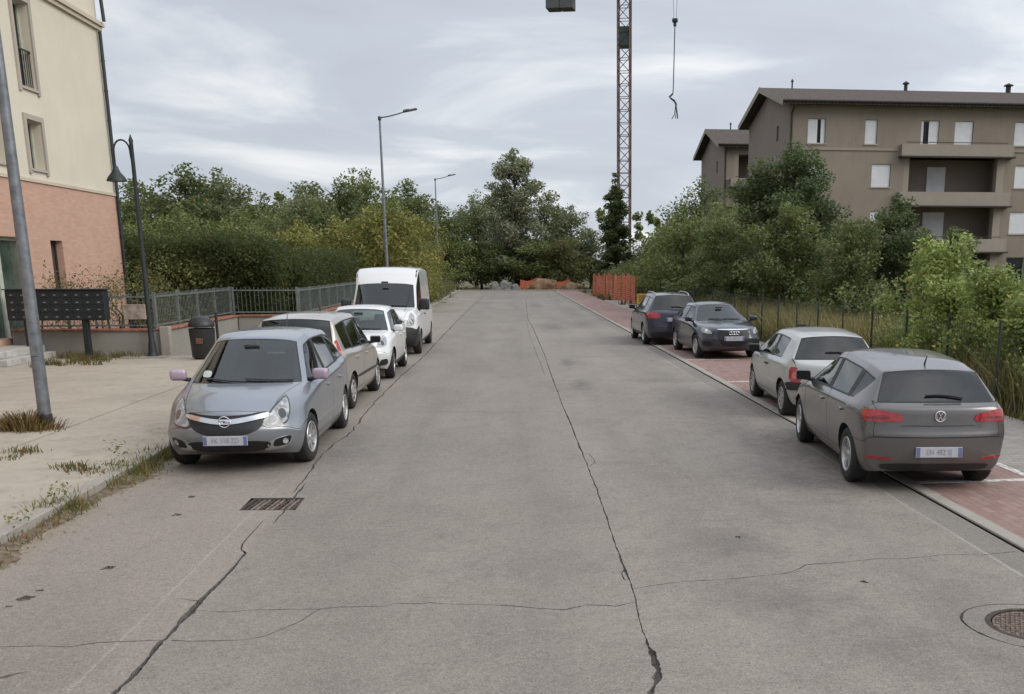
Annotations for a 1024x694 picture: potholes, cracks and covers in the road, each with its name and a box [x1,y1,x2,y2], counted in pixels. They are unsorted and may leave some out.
manhole cover [985,608,1024,639]
drain grate [240,498,304,512]
crack [5,298,1016,694]
